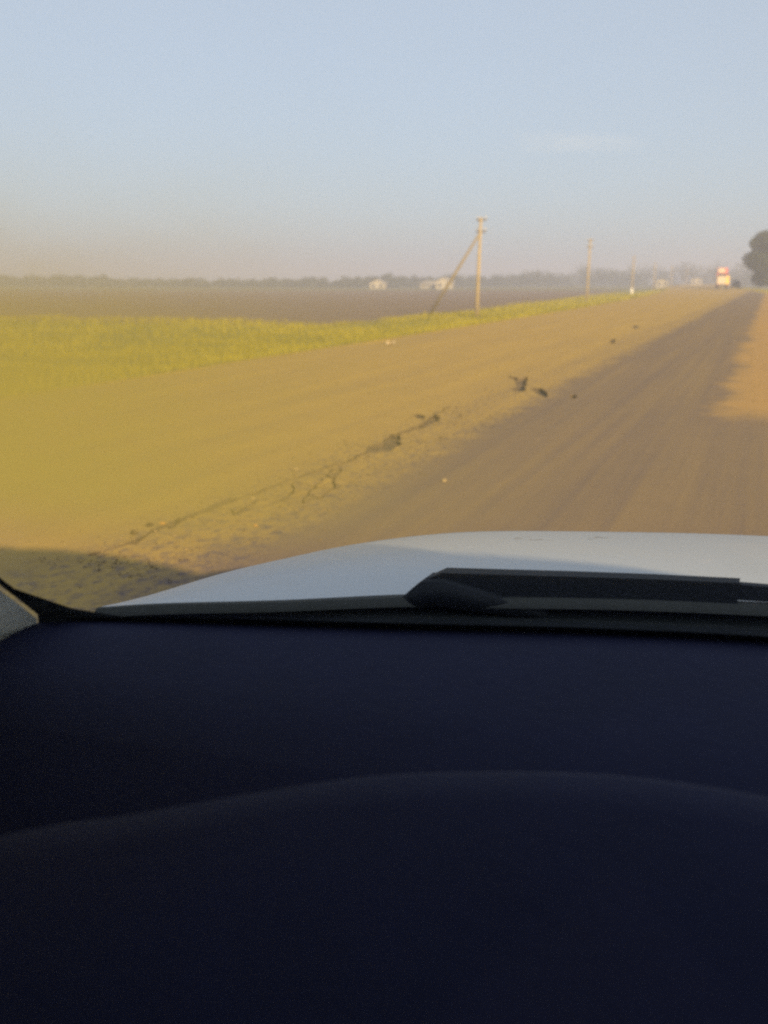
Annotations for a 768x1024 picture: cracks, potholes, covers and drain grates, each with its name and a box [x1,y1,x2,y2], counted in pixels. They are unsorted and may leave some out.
pothole [365,434,403,454]
pothole [509,376,528,392]
crack [88,406,450,556]
